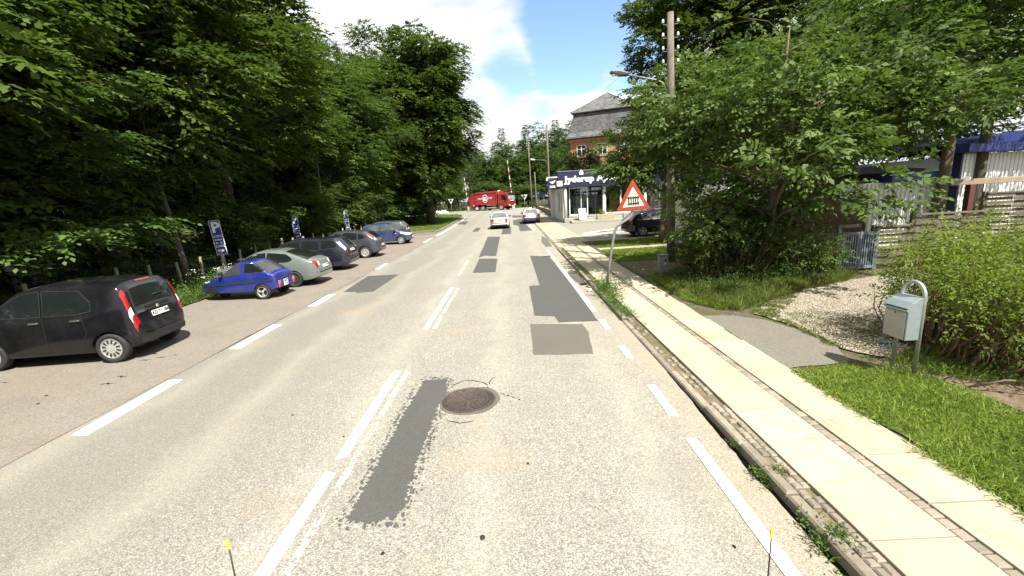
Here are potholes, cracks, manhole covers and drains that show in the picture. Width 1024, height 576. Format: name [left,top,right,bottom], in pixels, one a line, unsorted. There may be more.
manhole cover [440,387,500,415]
